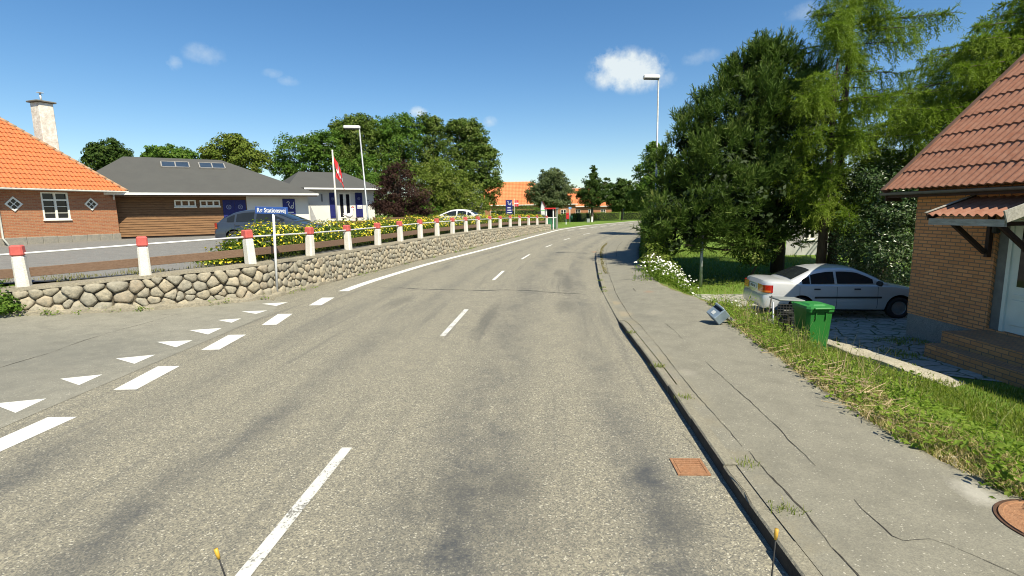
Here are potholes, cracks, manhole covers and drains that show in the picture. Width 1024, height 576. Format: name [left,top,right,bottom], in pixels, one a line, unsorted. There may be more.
crack [854,499,1020,576]
manhole cover [992,499,1024,537]
crack [606,242,860,576]
